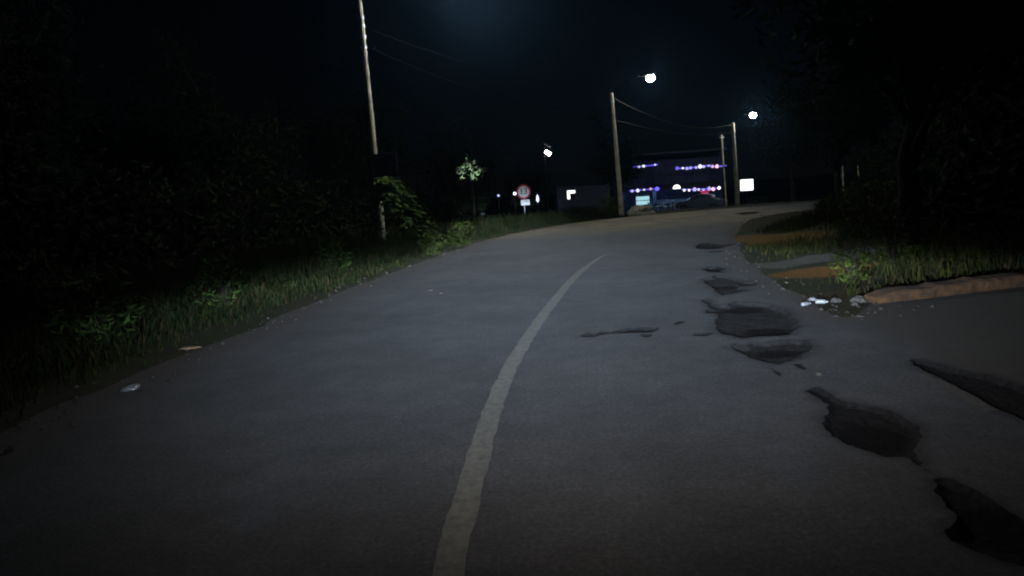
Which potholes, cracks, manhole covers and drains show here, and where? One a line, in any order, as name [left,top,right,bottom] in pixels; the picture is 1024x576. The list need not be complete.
pothole [910,359,1024,421]
pothole [932,478,1024,567]
pothole [703,275,757,295]
pothole [806,387,930,472]
pothole [701,299,802,338]
pothole [731,339,813,364]
